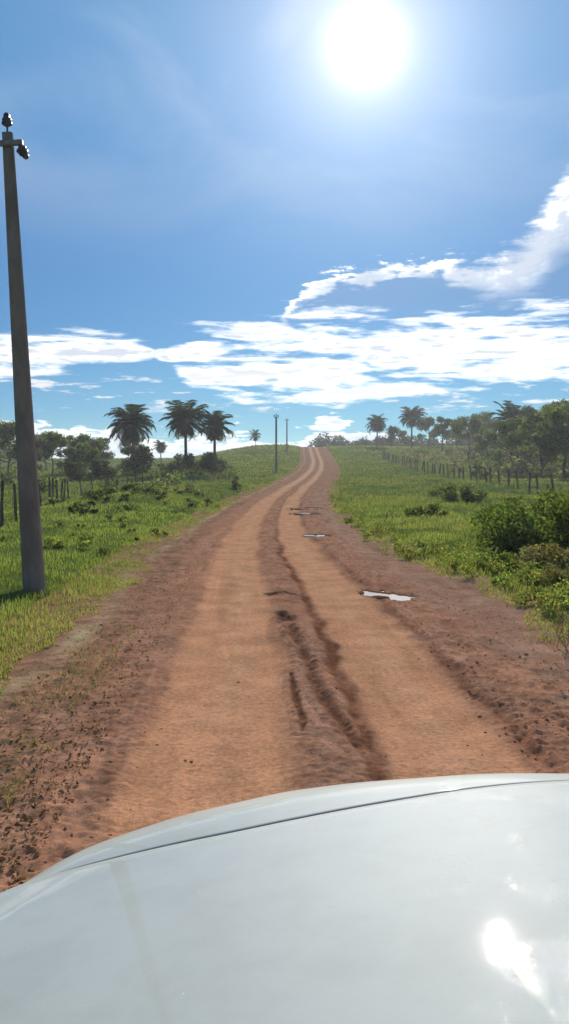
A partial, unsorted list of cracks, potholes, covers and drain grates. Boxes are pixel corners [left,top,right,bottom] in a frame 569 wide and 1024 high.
pothole [356,589,420,602]
